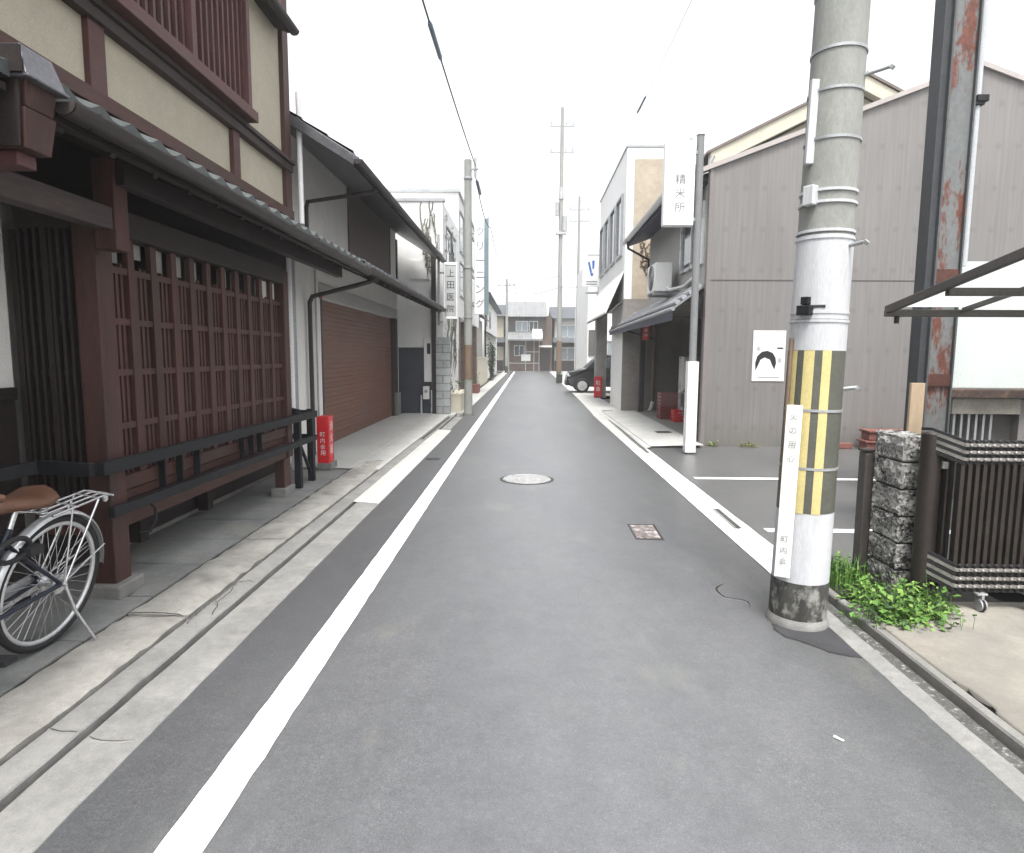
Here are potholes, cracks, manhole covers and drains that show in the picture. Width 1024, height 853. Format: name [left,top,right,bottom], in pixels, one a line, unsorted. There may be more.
manhole cover [627,524,664,540]
manhole cover [500,474,554,485]
crack [48,728,136,743]
crack [714,583,752,606]
drain grate [713,508,742,529]
